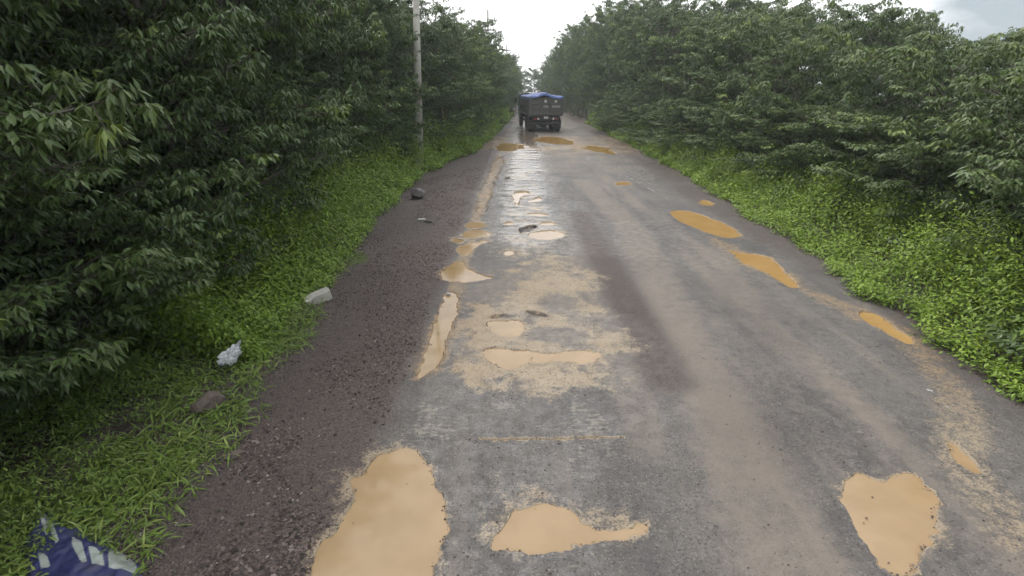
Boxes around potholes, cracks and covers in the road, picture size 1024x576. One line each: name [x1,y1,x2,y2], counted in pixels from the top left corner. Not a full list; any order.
pothole [667,209,745,239]
pothole [483,317,531,340]
pothole [302,443,456,576]
pothole [831,465,949,576]
pothole [411,291,462,380]
pothole [573,145,622,155]
pothole [723,247,803,289]
